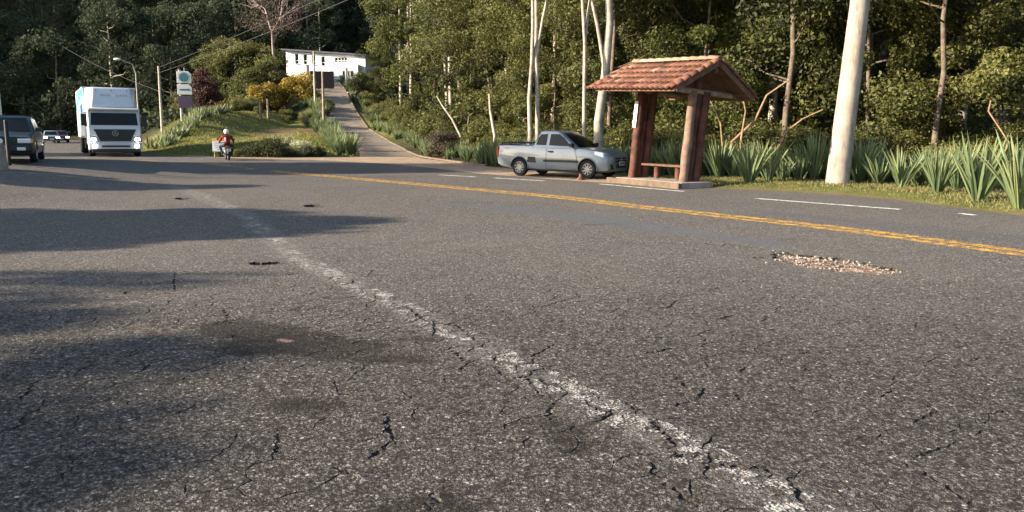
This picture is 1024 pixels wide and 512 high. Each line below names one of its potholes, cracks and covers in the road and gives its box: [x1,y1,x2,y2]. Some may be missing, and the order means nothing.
crack [258,273,1018,512]
pothole [770,252,908,275]
crack [0,272,418,503]
